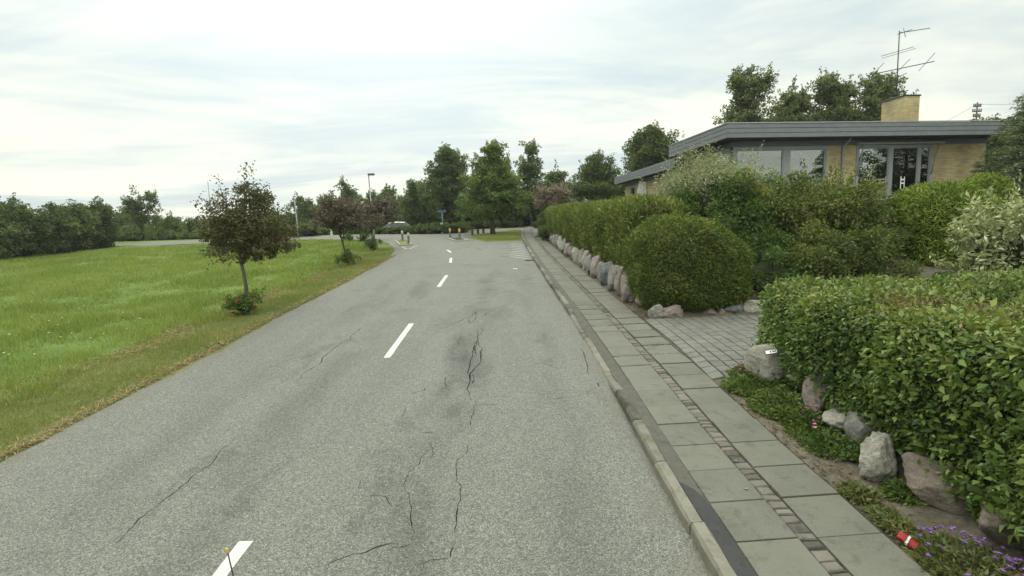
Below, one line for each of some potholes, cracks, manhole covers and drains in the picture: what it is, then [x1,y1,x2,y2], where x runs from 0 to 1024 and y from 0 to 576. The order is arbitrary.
crack [328,303,512,569]
crack [111,436,239,544]
